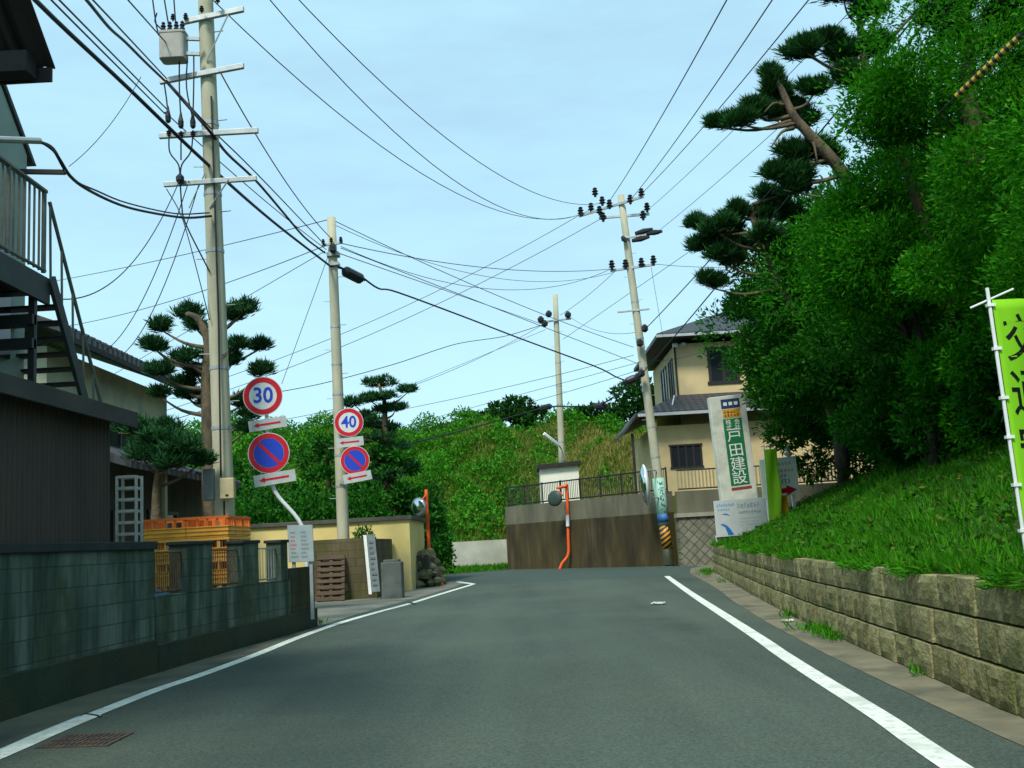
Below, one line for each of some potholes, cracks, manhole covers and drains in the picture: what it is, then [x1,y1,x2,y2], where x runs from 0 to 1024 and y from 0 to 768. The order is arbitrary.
drain grate [35,732,134,749]
